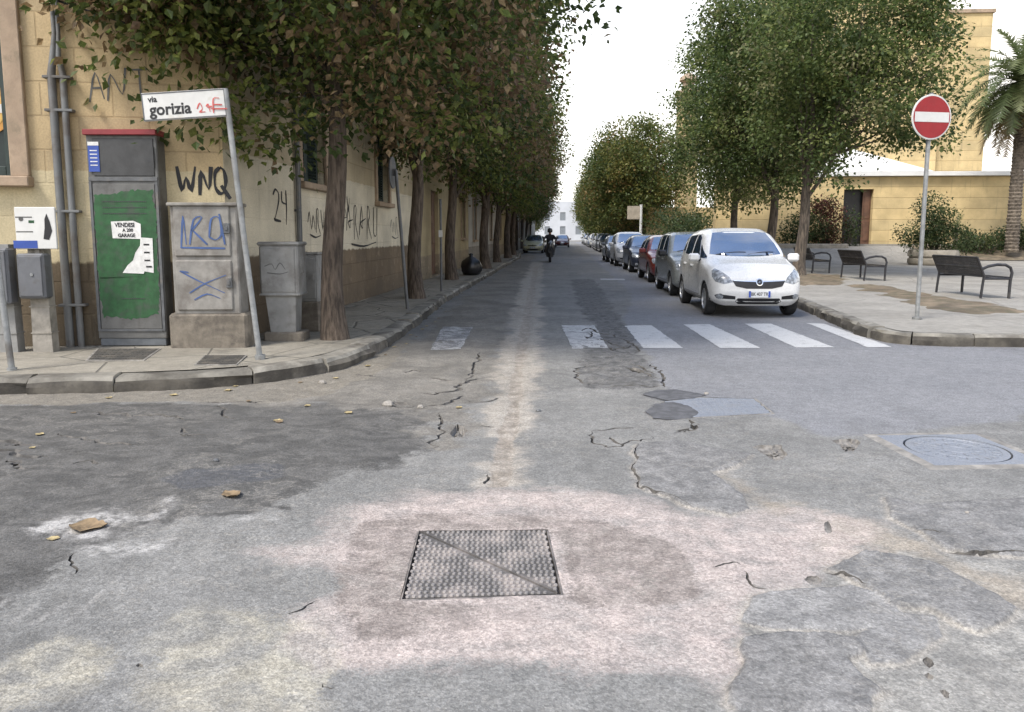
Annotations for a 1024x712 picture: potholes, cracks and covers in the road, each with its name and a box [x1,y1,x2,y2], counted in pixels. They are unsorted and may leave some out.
crack [715,562,765,589]
manhole cover [400,530,563,601]
pothole [753,445,787,461]
crack [68,554,80,574]
manhole cover [863,433,1024,470]
pothole [832,439,860,452]
crack [589,428,691,506]
crack [573,328,670,388]
crack [380,352,498,450]
crack [675,419,699,433]
